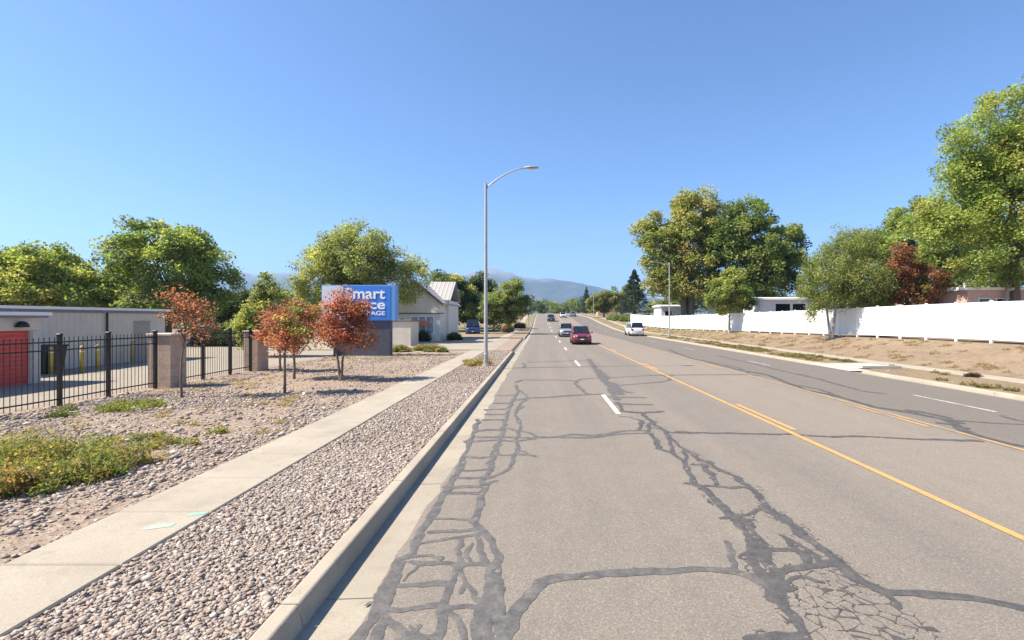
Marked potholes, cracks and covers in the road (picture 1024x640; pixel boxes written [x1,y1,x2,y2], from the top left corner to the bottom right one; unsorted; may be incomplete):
crack [514,349,1024,640]
